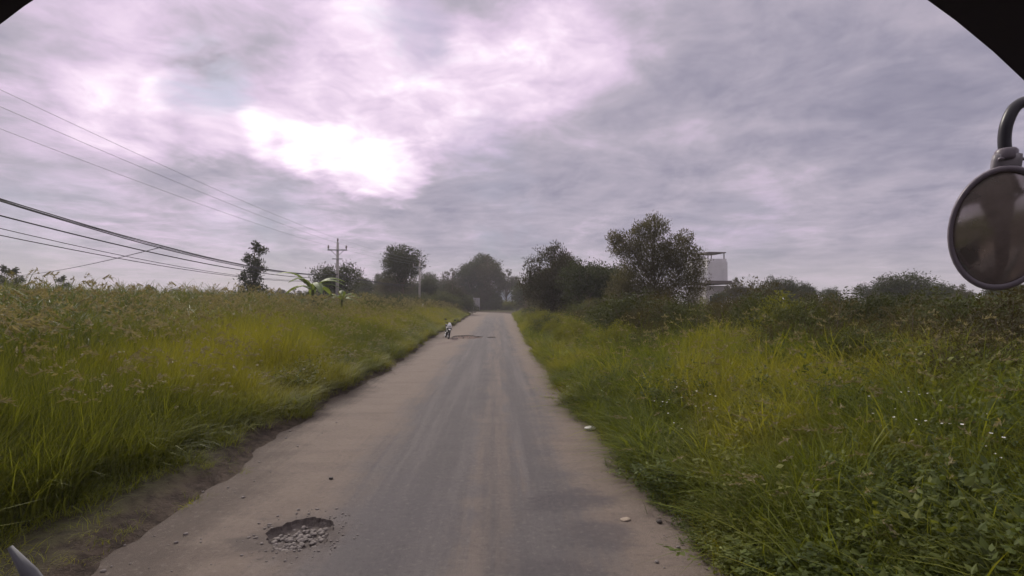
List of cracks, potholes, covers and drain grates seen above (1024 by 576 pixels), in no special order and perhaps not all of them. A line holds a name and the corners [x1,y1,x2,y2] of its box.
pothole [265,517,334,551]
